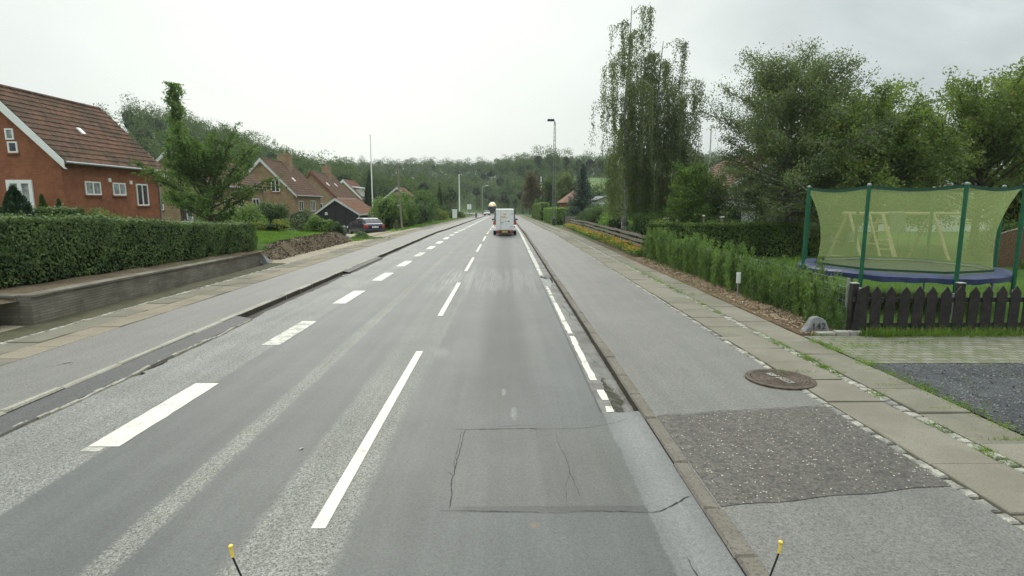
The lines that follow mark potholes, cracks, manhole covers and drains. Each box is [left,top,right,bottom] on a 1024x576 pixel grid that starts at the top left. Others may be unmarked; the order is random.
manhole cover [745,369,817,390]
crack [446,420,689,513]
